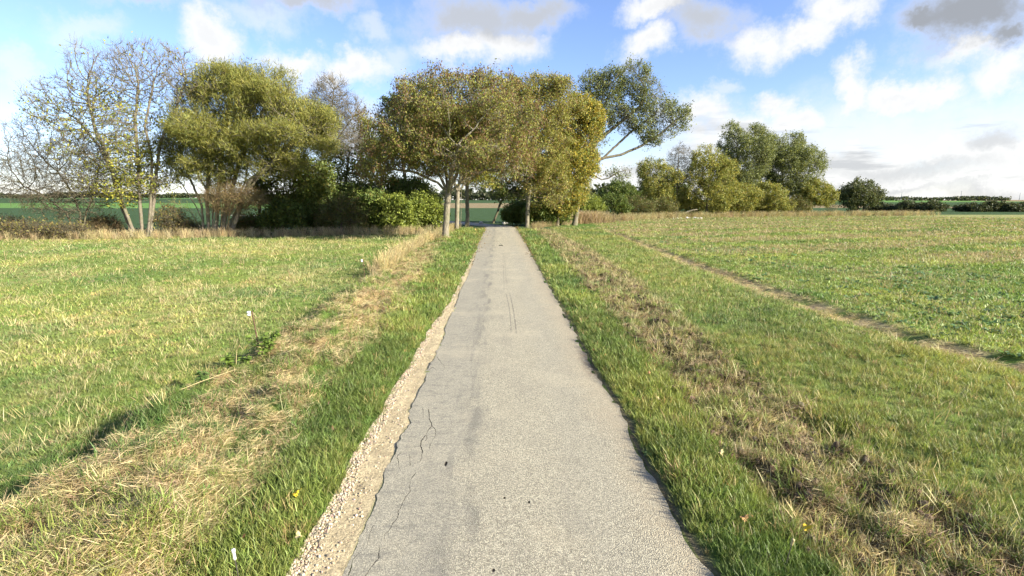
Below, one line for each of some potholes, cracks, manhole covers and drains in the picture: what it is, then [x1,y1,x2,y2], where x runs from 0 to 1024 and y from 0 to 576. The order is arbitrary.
crack [348,410,436,576]
